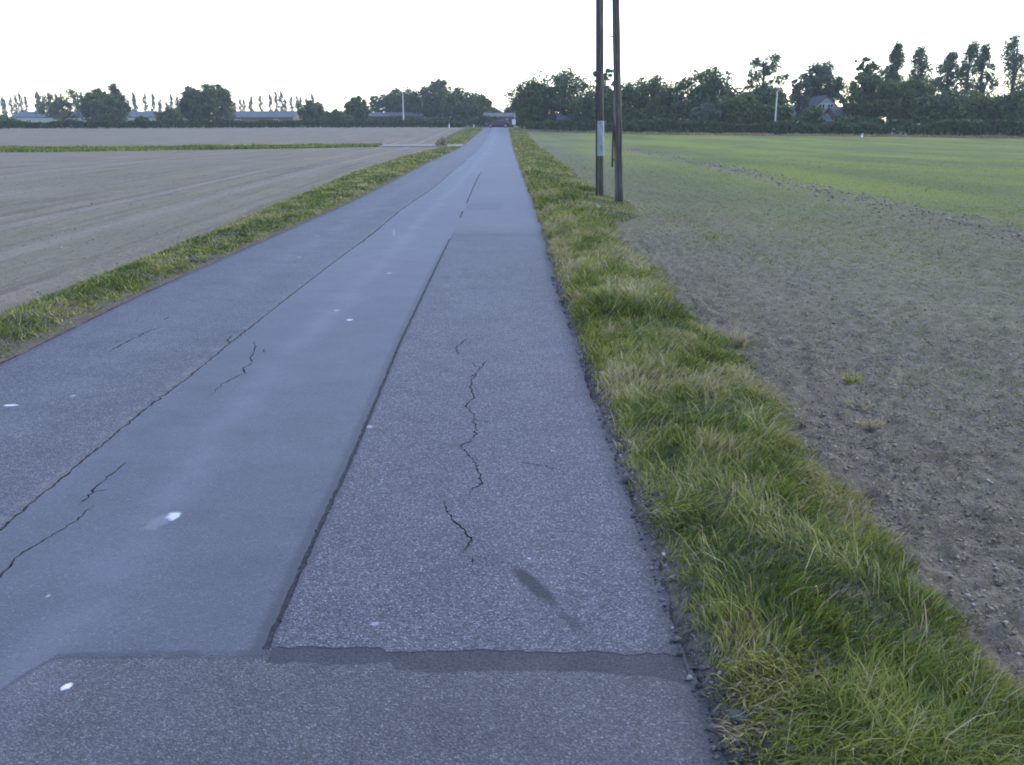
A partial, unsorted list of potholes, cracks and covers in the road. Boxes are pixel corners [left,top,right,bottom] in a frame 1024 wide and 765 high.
crack [0,161,486,650]
